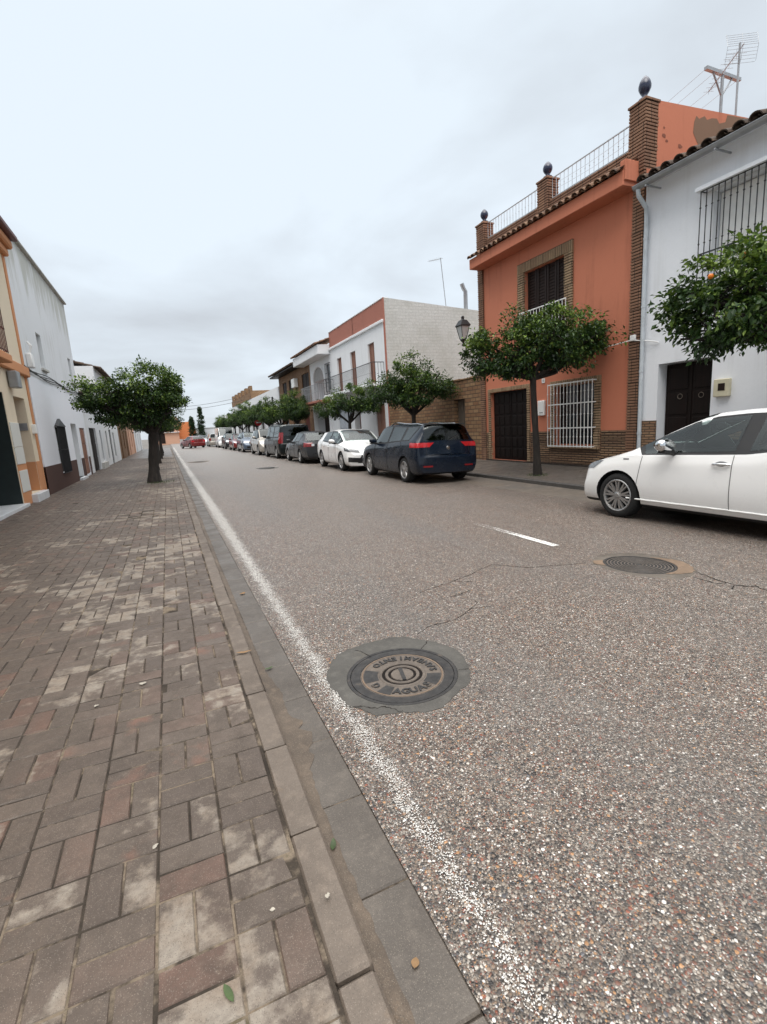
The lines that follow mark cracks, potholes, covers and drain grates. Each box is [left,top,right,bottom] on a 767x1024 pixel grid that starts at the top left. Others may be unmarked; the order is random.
crack [412,563,579,635]
manhole cover [591,553,696,579]
manhole cover [326,637,471,716]
